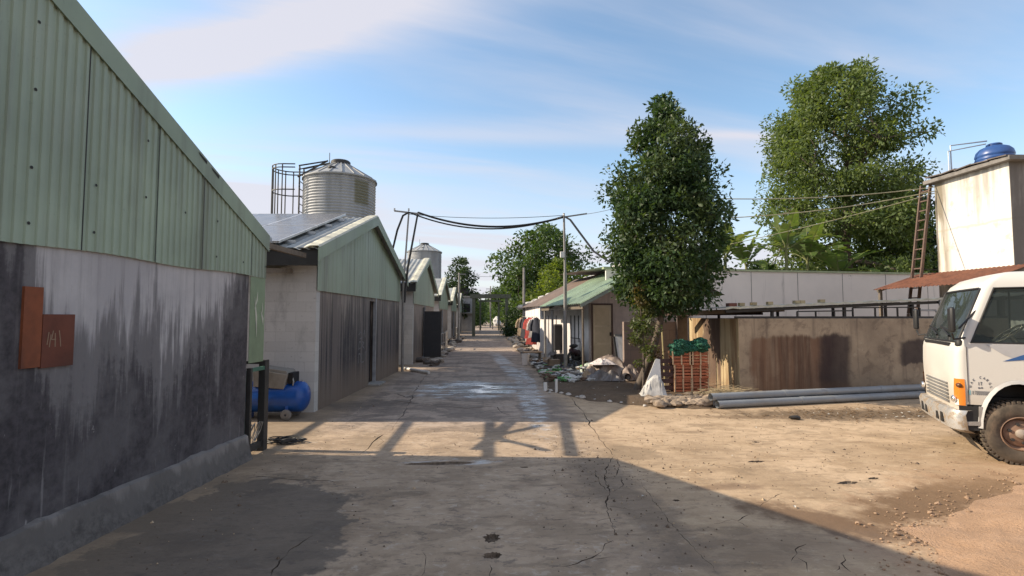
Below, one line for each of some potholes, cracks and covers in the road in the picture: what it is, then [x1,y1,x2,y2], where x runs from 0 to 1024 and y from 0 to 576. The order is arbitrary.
crack [558,459,629,567]
pothole [483,533,500,543]
